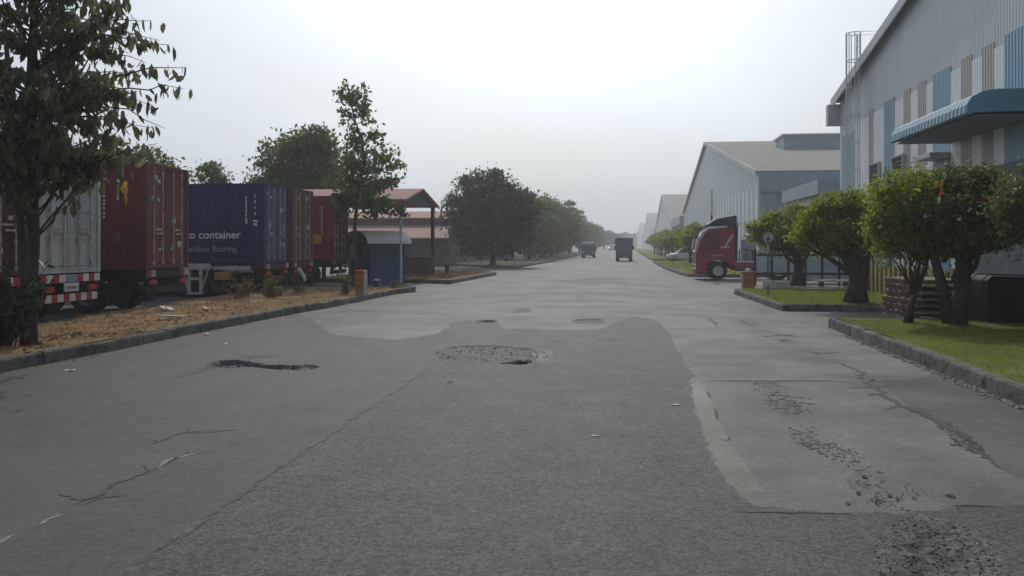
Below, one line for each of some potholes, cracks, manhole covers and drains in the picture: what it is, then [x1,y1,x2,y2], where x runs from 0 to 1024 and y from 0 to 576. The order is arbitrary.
pothole [205,360,319,370]
crack [750,329,1009,473]
crack [39,427,220,525]
pothole [846,471,958,515]
pothole [433,345,554,365]
